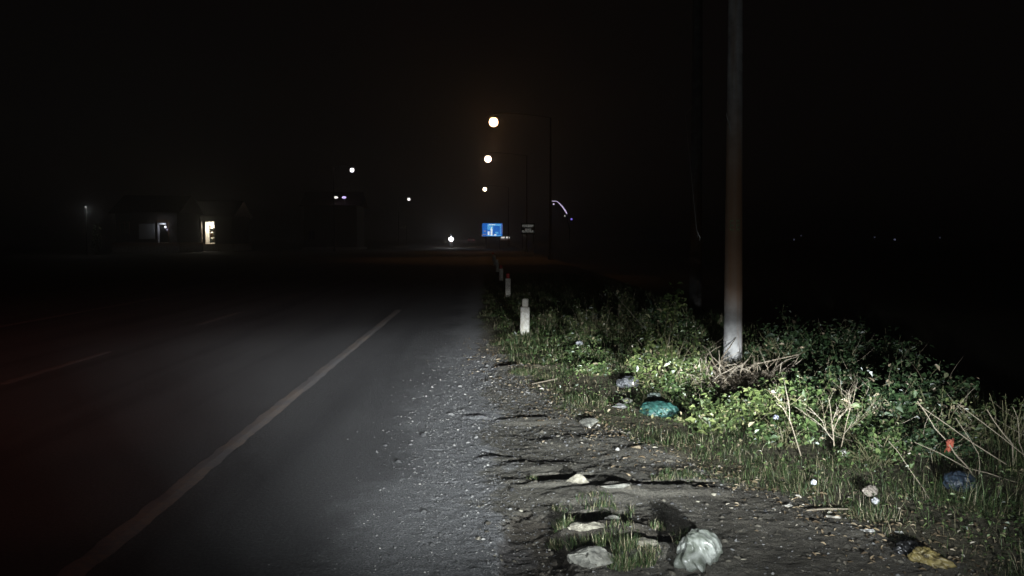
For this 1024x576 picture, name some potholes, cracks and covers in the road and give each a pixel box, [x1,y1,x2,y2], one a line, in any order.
pothole [621,532,682,544]
pothole [552,507,644,522]
crack [478,449,515,457]
